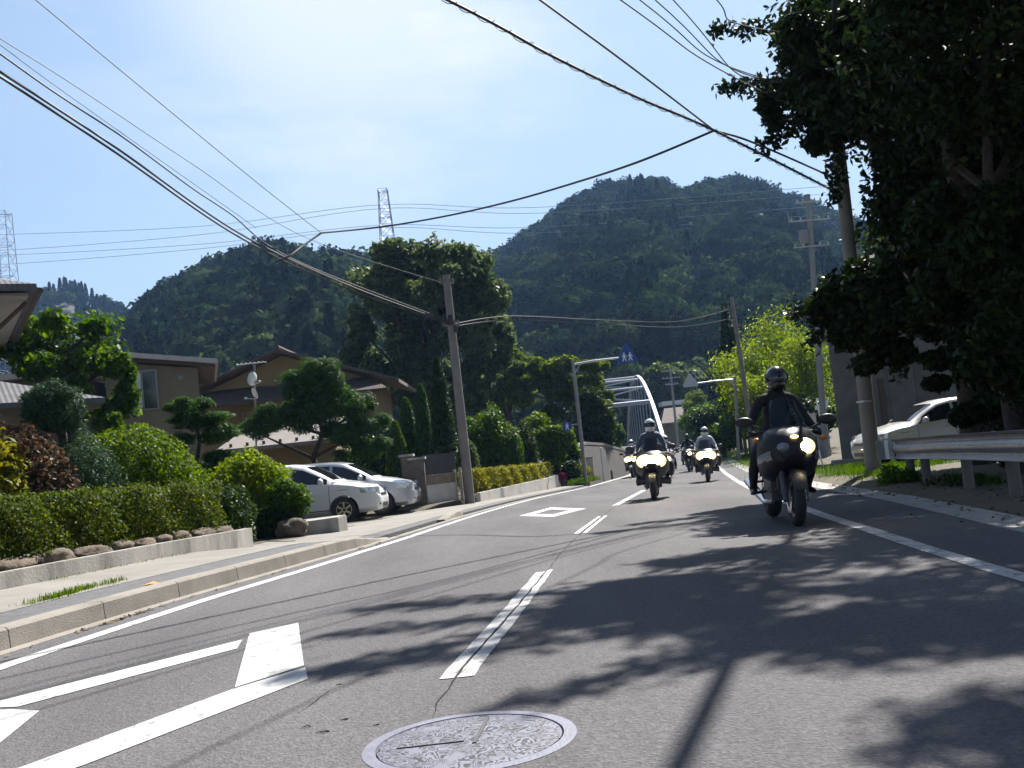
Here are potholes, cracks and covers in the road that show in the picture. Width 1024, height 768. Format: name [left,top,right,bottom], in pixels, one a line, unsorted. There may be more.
crack [432,509,611,718]
manhole cover [361,711,577,768]
